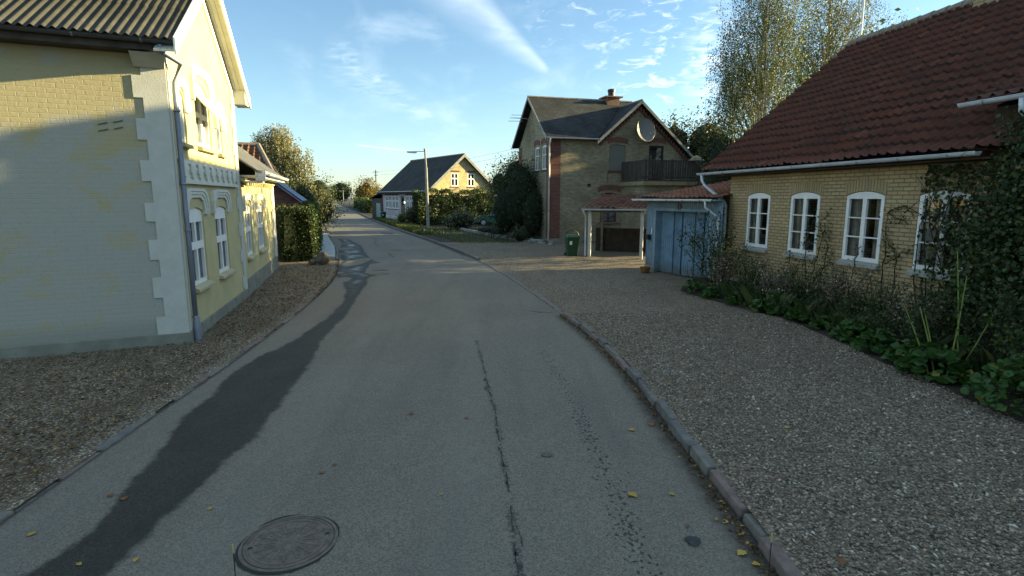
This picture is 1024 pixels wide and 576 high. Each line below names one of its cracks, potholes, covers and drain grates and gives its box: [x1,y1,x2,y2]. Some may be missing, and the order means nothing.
manhole cover [234,514,339,575]
crack [478,345,526,576]
